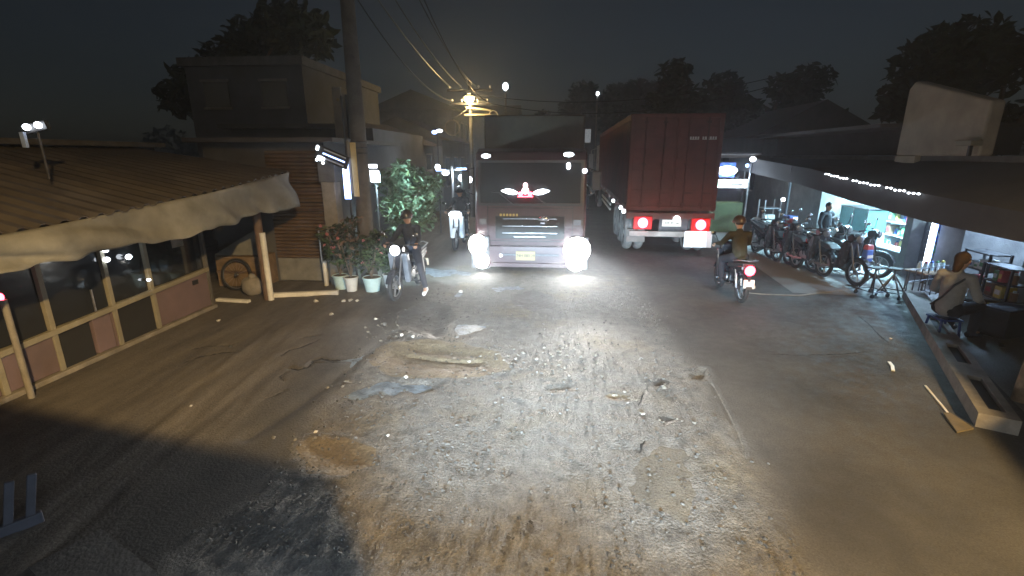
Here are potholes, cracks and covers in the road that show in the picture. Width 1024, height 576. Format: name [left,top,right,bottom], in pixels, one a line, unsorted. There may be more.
drain grate [948,347,967,363]
crack [268,336,344,399]
crack [771,317,888,355]
drain grate [969,379,1001,411]
pothole [366,339,512,379]
